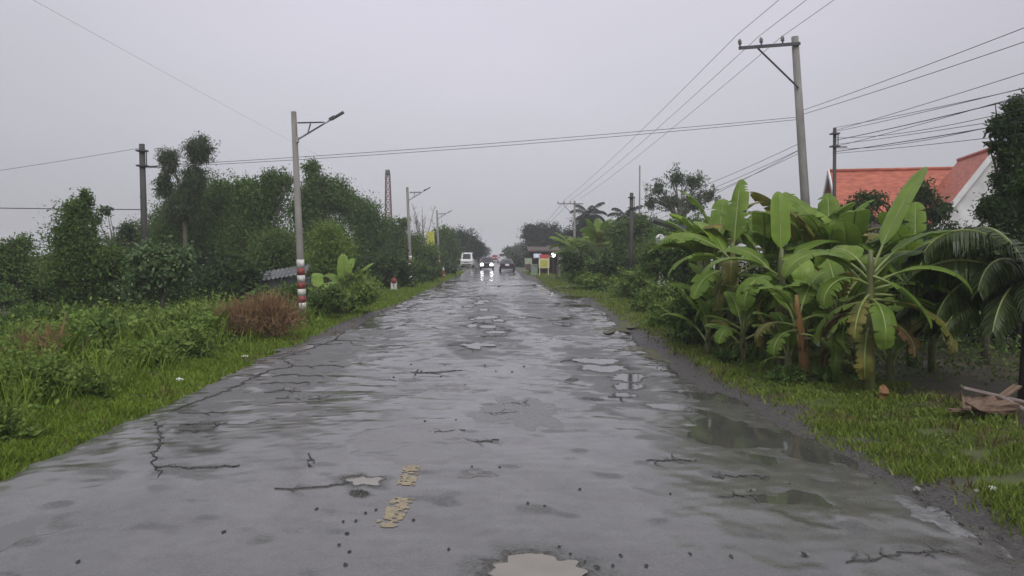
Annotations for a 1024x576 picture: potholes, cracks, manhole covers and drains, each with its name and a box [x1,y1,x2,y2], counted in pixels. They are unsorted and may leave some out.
crack [846,544,960,563]
crack [134,331,366,478]
pothole [576,363,640,374]
pothole [340,474,387,487]
pothole [610,382,647,391]
pothole [568,357,626,365]
pothole [349,489,370,497]
crack [274,453,350,493]
crack [646,452,770,501]
pothole [475,549,596,576]
pothole [446,342,498,352]
pothole [605,372,657,383]
